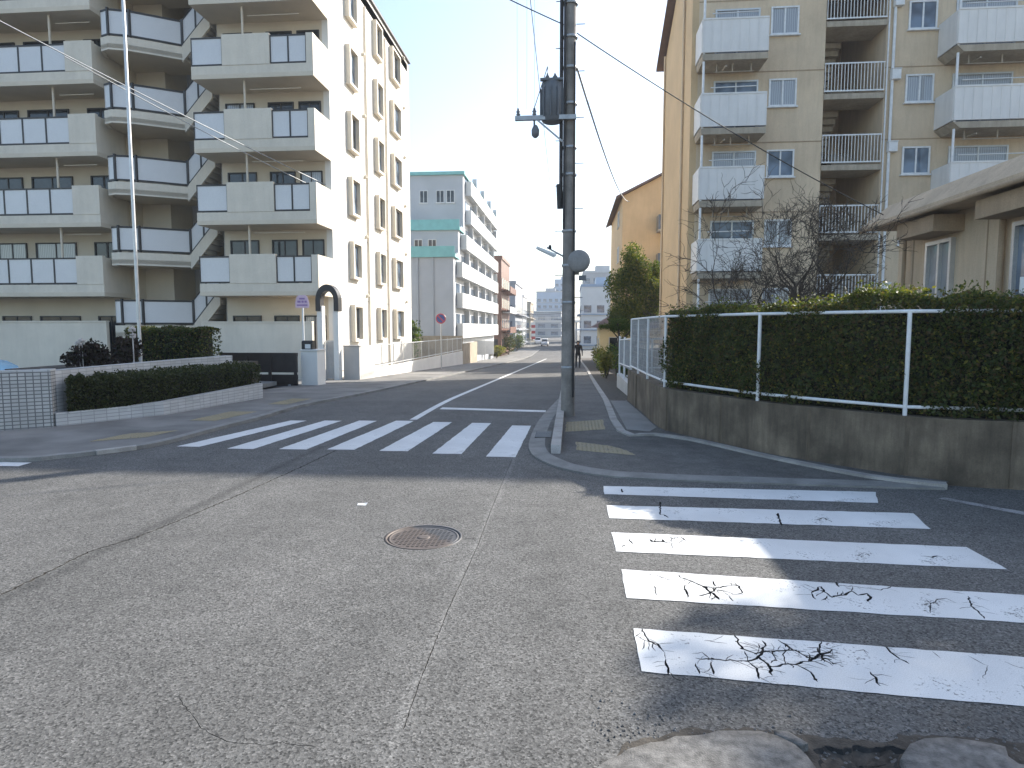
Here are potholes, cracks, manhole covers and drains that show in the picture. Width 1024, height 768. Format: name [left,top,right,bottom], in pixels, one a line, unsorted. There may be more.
manhole cover [384,525,463,550]
crack [811,582,891,602]
crack [180,699,315,747]
crack [634,629,838,687]
crack [650,574,743,601]
pothole [813,746,905,768]
